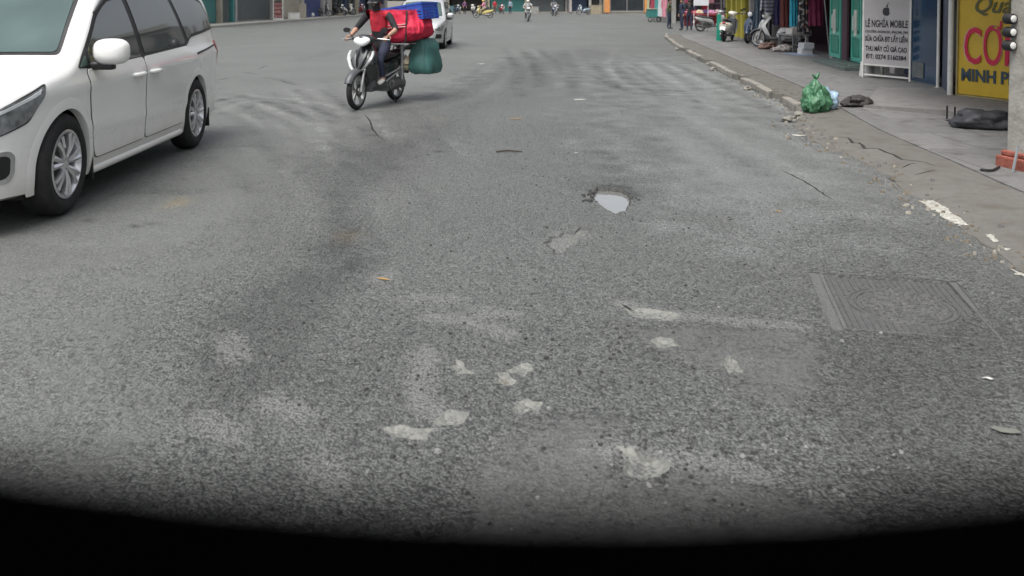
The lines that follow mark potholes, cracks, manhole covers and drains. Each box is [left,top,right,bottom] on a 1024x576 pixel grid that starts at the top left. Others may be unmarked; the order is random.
pothole [592,187,632,214]
pothole [433,409,469,426]
crack [830,136,932,182]
pothole [451,359,476,376]
manhole cover [809,273,1004,342]
pothole [543,226,592,256]
pothole [383,425,435,440]
pothole [495,372,516,386]
pothole [617,446,672,479]
pothole [507,363,534,377]
pothole [649,337,679,349]
pothole [512,398,543,415]
